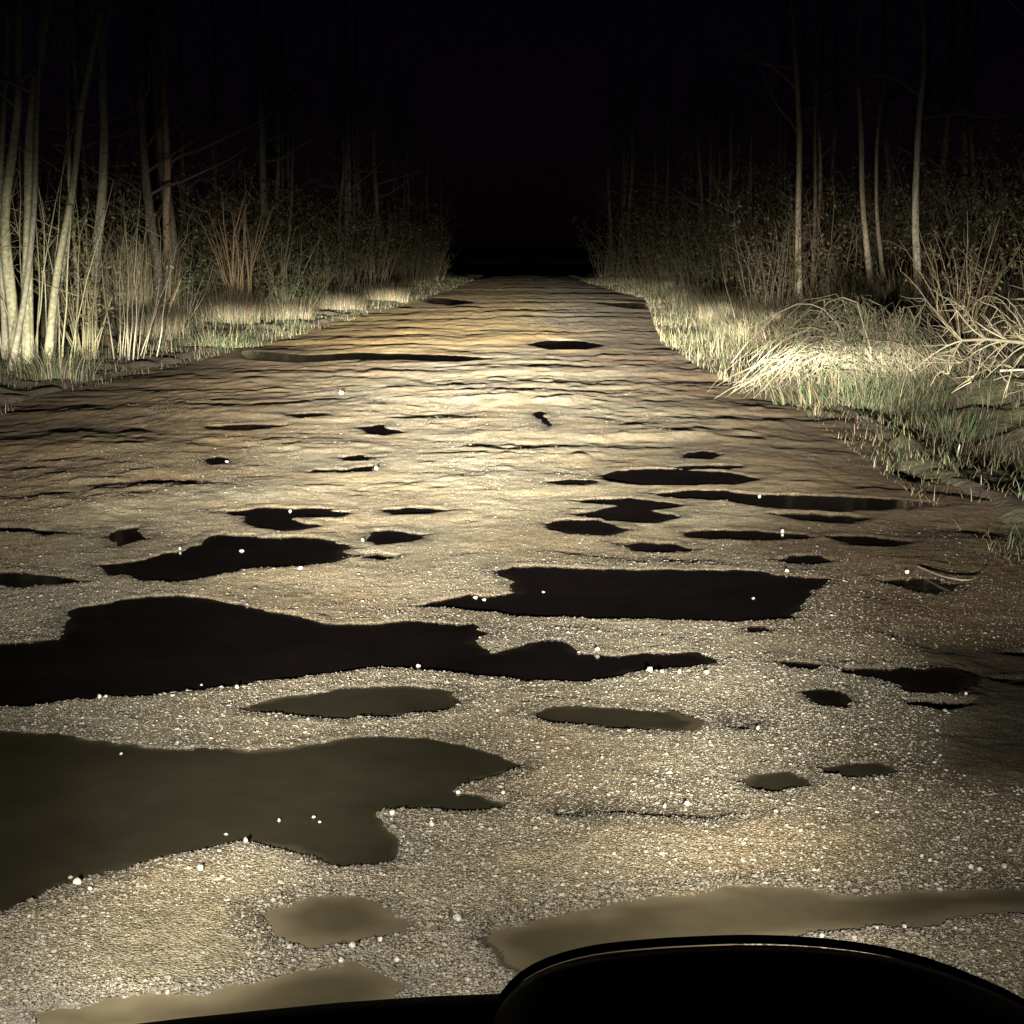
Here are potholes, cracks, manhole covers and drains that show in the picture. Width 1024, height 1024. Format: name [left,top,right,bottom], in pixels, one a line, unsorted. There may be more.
pothole [0,722,549,922]
pothole [827,659,996,694]
pothole [187,502,371,533]
pothole [221,880,449,956]
pothole [584,465,780,488]
pothole [0,589,742,713]
pothole [390,561,850,626]
pothole [548,494,705,526]
pothole [212,678,487,726]
pothole [0,948,444,1024]
pothole [792,751,934,786]
pothole [777,681,877,713]
